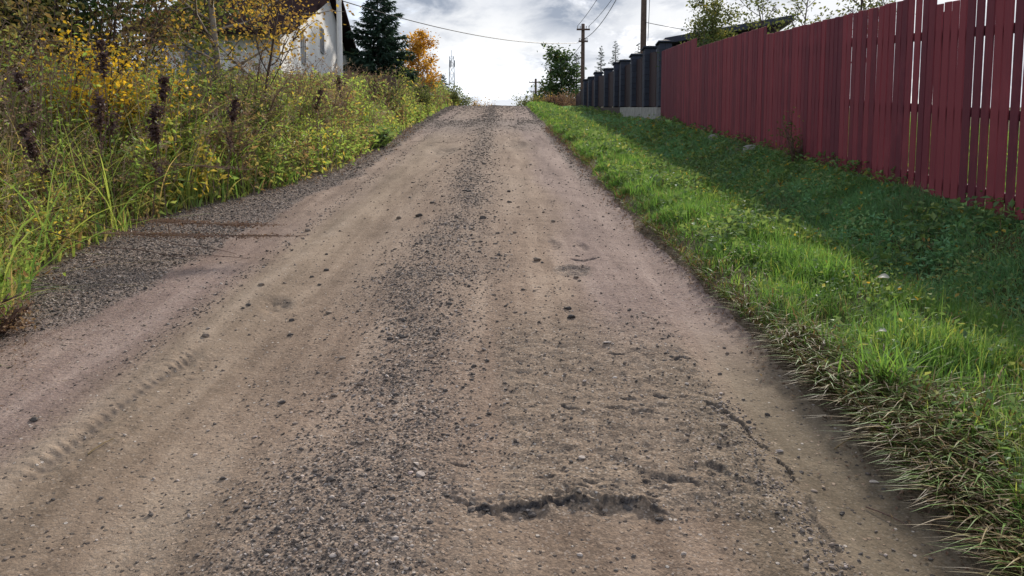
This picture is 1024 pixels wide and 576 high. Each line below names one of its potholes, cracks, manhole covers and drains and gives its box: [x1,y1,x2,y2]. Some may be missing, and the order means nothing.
pothole [249,291,302,320]
pothole [550,263,601,278]
